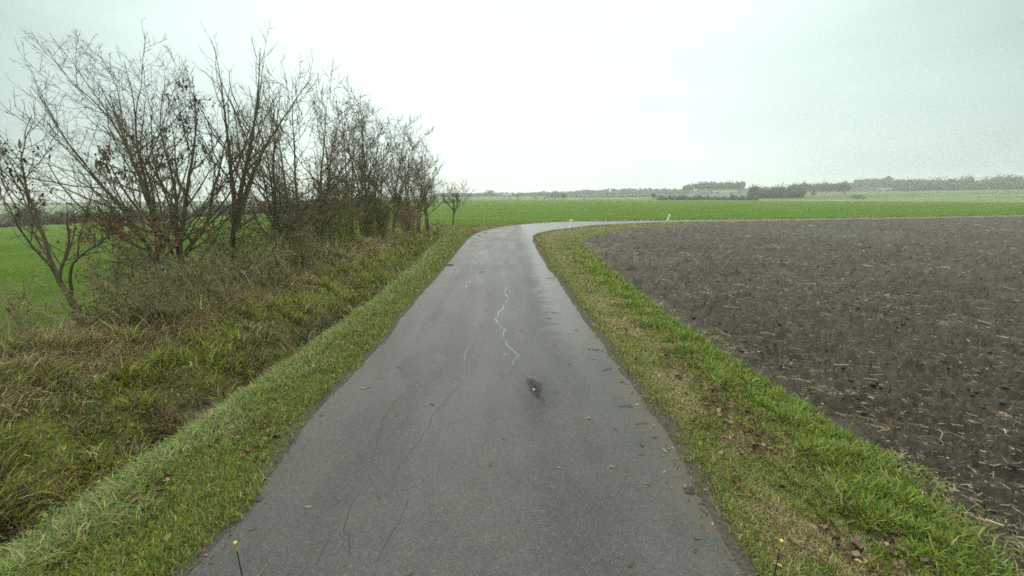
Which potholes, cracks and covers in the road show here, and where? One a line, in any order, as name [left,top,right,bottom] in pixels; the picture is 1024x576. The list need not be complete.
crack [317,380,460,563]
pothole [525,379,549,408]
crack [494,281,532,378]
